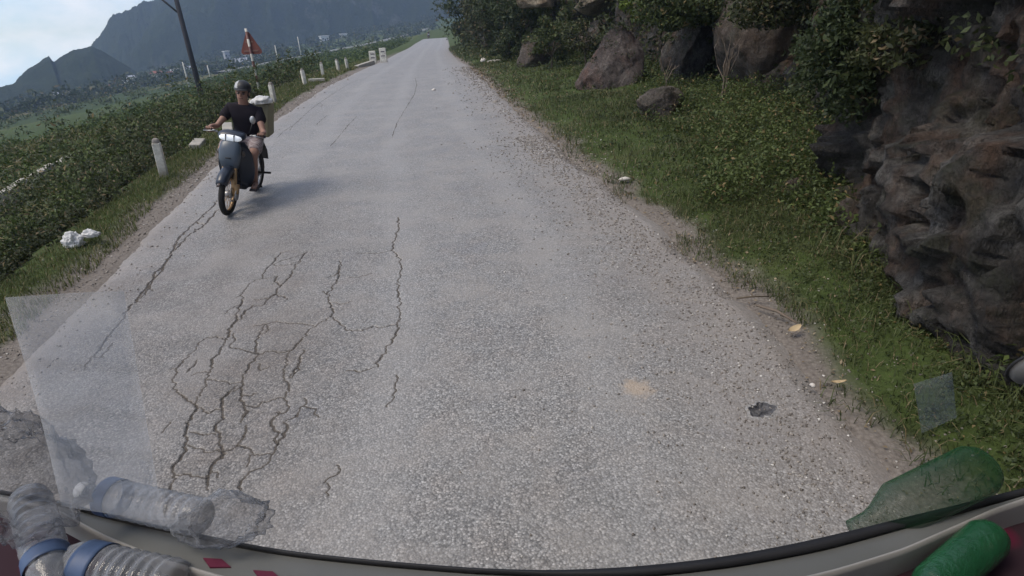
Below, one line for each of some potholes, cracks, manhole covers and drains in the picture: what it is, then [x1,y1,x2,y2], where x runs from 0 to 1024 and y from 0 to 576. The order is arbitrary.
crack [84,77,366,370]
crack [346,217,403,407]
crack [162,250,352,513]
pothole [745,401,780,419]
